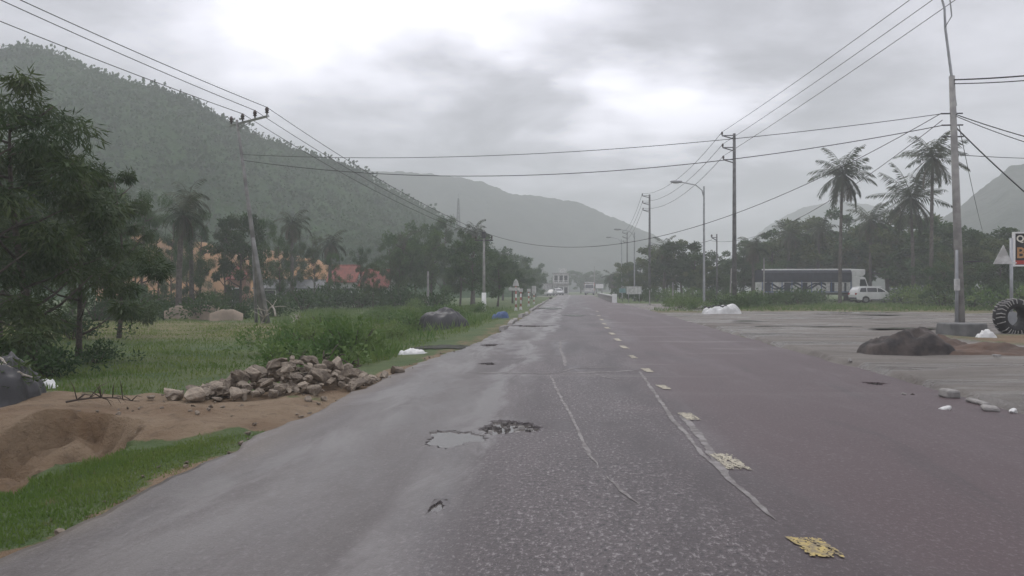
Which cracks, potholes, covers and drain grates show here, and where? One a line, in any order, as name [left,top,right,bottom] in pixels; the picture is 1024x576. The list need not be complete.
pothole [419,499,454,515]
crack [471,341,776,520]
pothole [469,419,548,437]
pothole [418,430,495,451]
